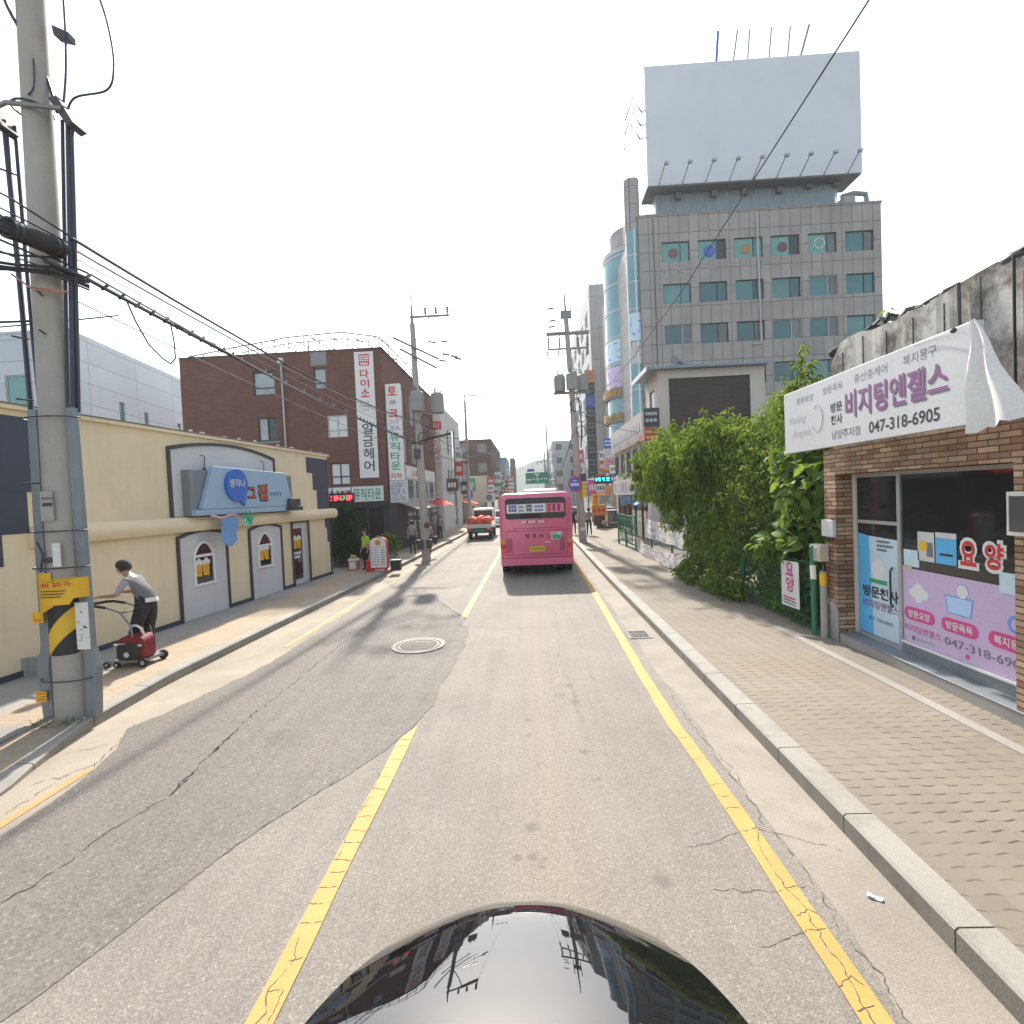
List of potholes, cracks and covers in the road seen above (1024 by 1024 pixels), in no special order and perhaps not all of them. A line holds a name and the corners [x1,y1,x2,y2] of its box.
crack [2,612,388,903]
manhole cover [391,637,445,654]
drain grate [625,630,653,639]
